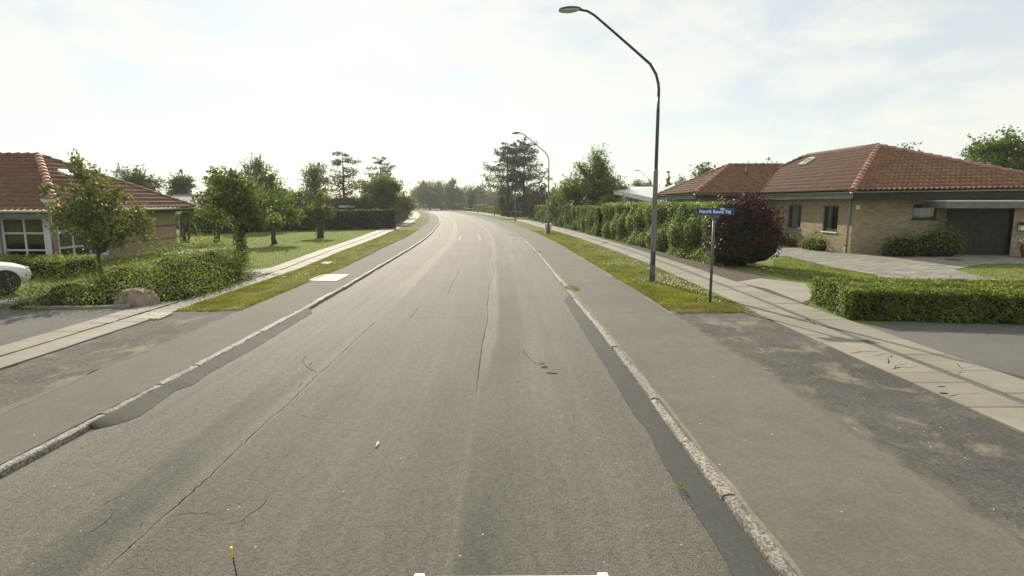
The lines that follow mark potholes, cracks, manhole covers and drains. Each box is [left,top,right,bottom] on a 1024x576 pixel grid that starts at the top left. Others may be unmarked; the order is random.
crack [854,351,912,370]
crack [84,264,495,575]
